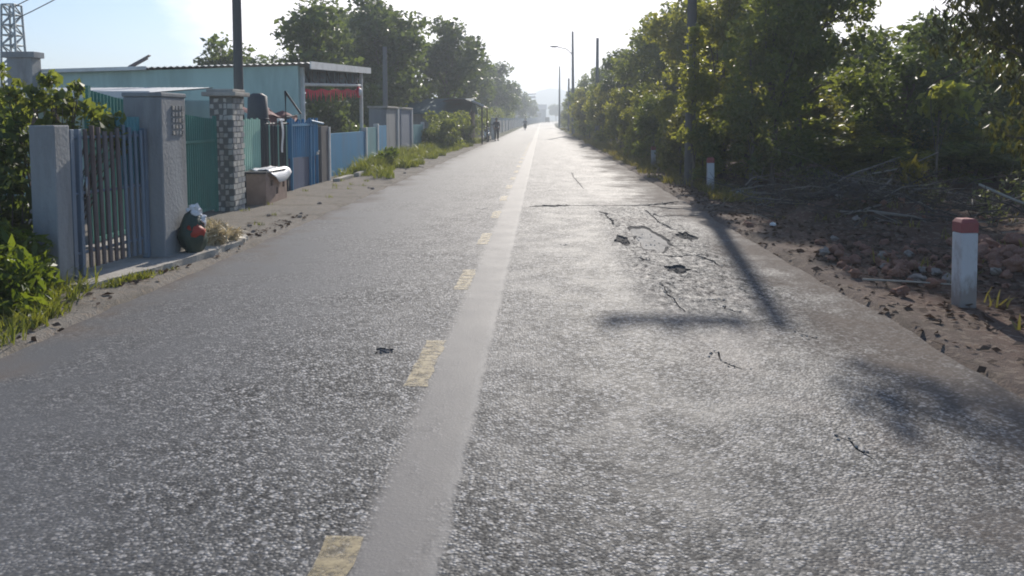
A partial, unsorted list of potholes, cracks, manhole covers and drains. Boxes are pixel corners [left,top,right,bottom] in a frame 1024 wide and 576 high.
crack [645,210,702,230]
pothole [664,264,692,274]
crack [708,350,751,370]
pothole [614,235,630,246]
crack [834,433,876,461]
crack [636,254,723,266]
pothole [675,231,698,241]
crack [659,283,685,312]
